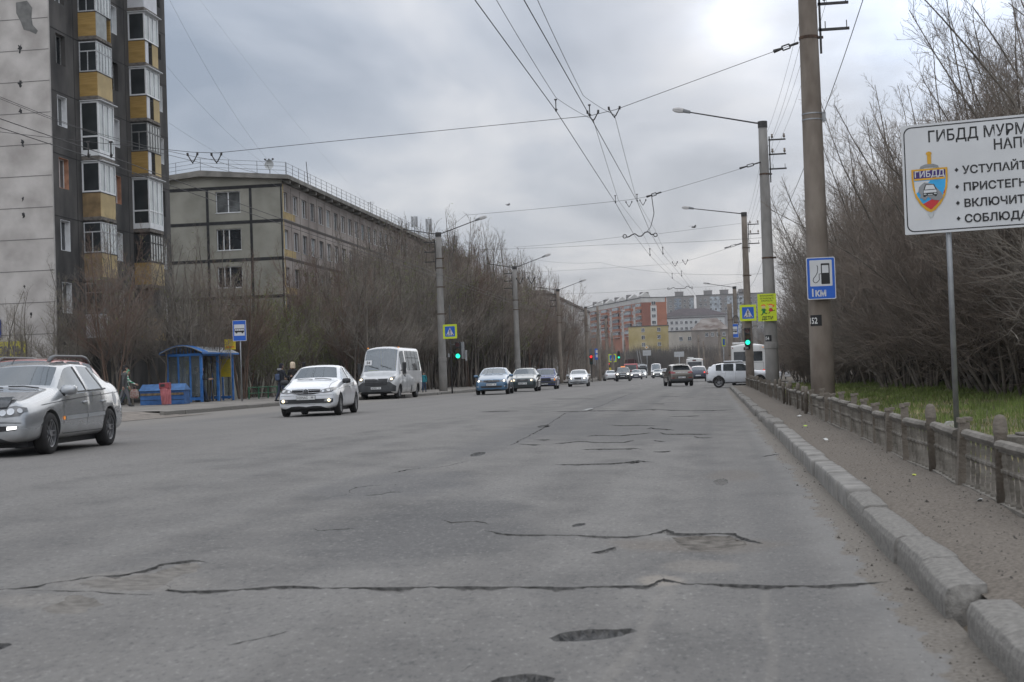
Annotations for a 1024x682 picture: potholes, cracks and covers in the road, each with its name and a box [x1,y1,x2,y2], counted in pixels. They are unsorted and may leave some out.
pothole [550,628,637,642]
crack [523,396,739,466]
pothole [491,674,555,682]
crack [444,520,763,554]
pothole [672,536,747,552]
crack [0,560,890,595]
